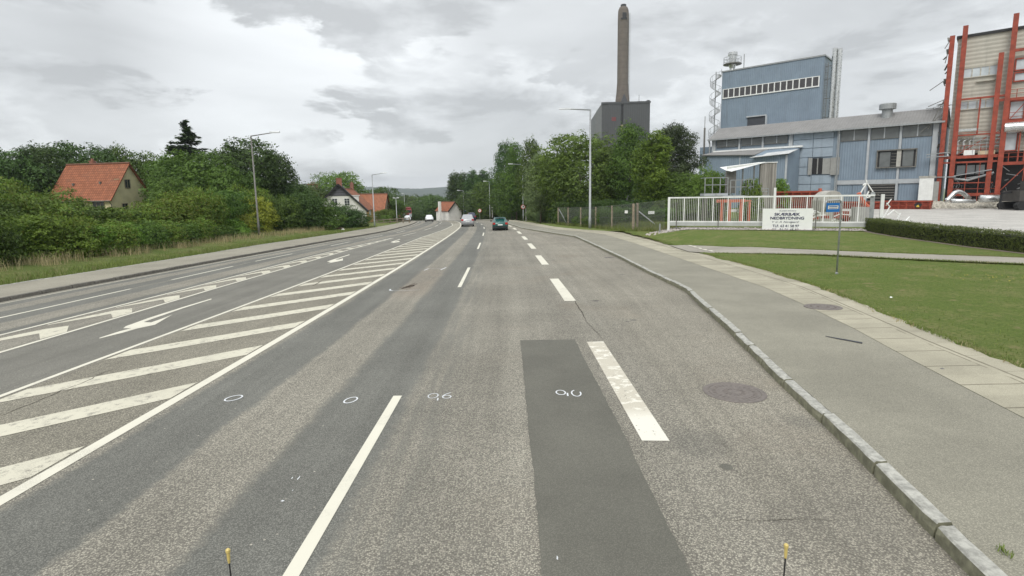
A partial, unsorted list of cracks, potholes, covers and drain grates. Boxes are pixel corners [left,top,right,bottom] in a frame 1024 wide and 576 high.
manhole cover [703,382,767,403]
